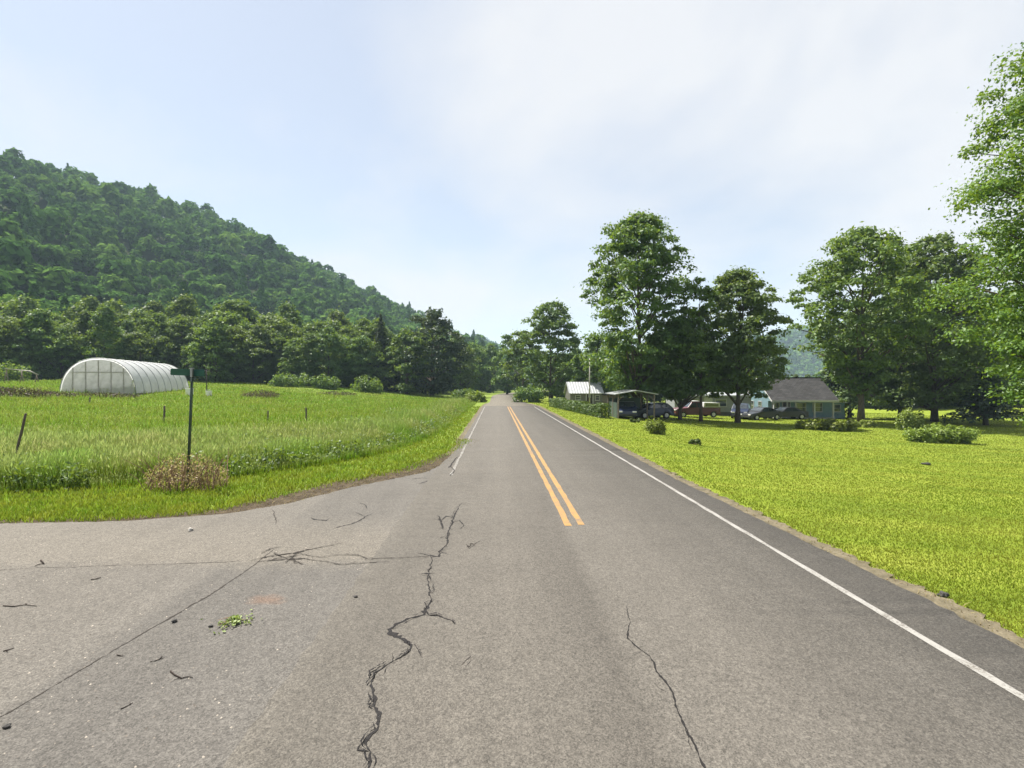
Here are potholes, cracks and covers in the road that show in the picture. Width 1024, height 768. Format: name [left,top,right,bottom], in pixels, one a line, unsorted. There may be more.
crack [626,606,706,768]
crack [254,502,479,768]
